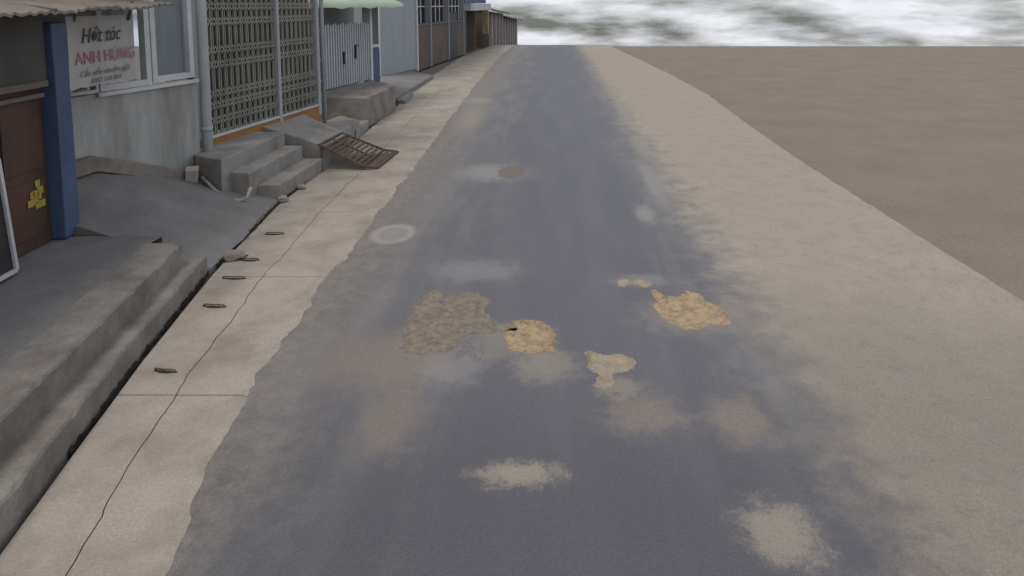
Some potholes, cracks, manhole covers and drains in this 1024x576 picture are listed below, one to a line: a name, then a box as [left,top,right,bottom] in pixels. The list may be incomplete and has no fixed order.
pothole [503,320,556,354]
pothole [399,290,517,356]
drain grate [318,132,399,171]
